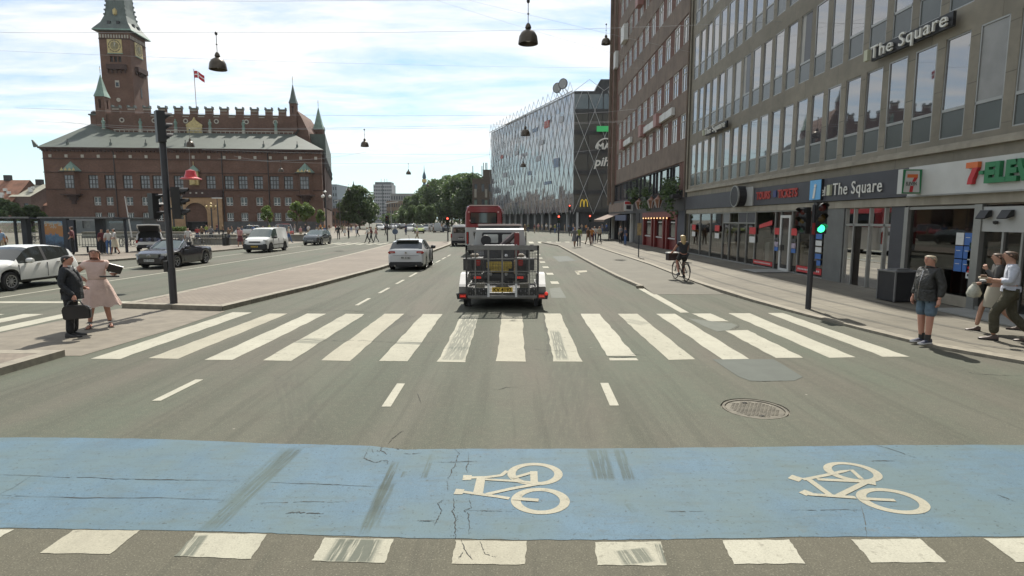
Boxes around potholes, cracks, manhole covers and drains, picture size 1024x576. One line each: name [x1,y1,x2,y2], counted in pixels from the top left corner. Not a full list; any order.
crack [364,430,417,463]
crack [419,449,495,559]
manhole cover [720,398,790,419]
